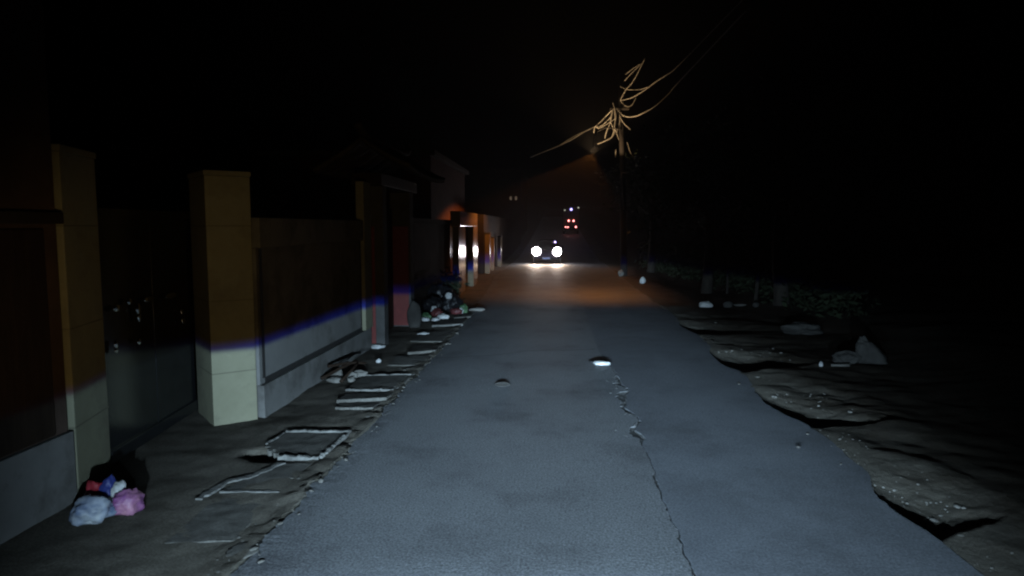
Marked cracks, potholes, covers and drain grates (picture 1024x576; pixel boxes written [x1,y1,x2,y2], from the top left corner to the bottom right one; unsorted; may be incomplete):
crack [441,335,696,576]
